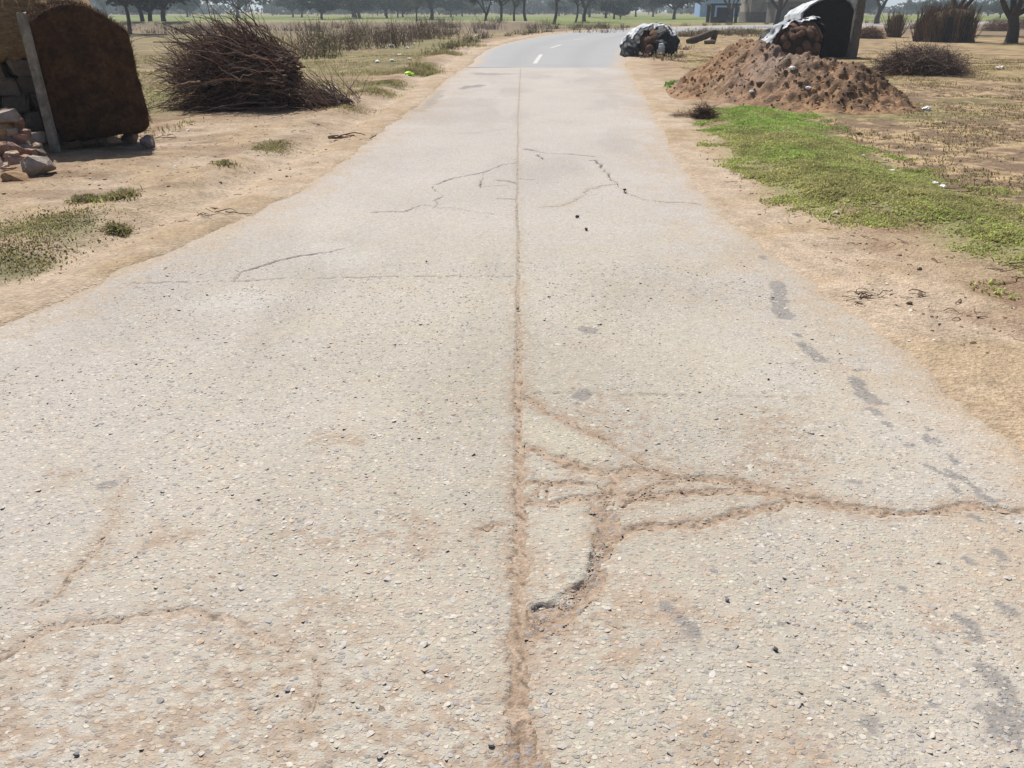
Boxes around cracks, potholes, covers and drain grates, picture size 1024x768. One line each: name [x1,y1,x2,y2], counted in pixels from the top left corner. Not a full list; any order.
crack [524,446,1024,546]
crack [0,607,323,742]
crack [36,478,131,608]
crack [520,396,658,470]
crack [538,156,627,208]
